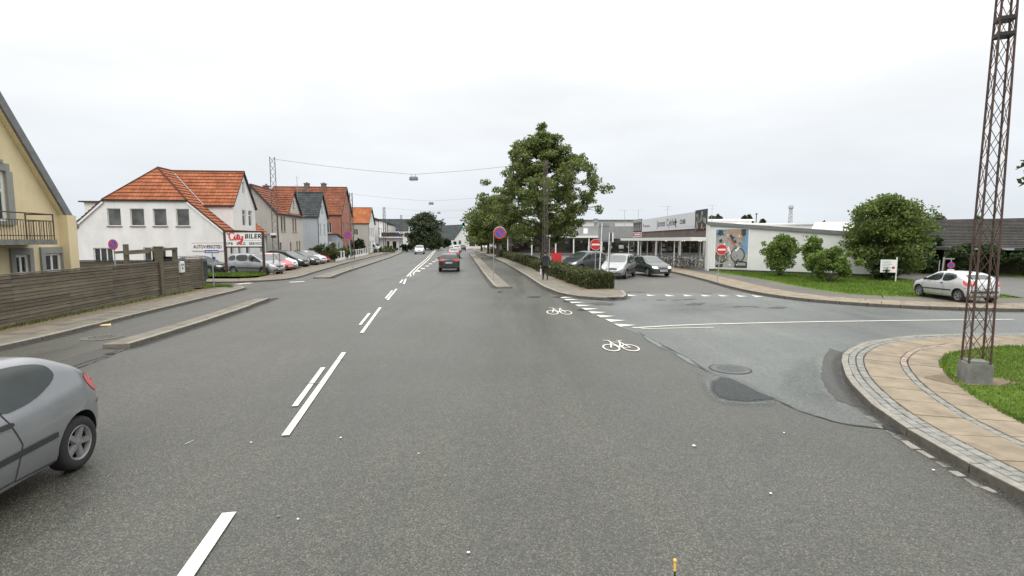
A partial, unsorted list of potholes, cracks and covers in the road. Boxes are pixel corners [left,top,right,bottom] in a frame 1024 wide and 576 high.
manhole cover [709,364,752,374]
